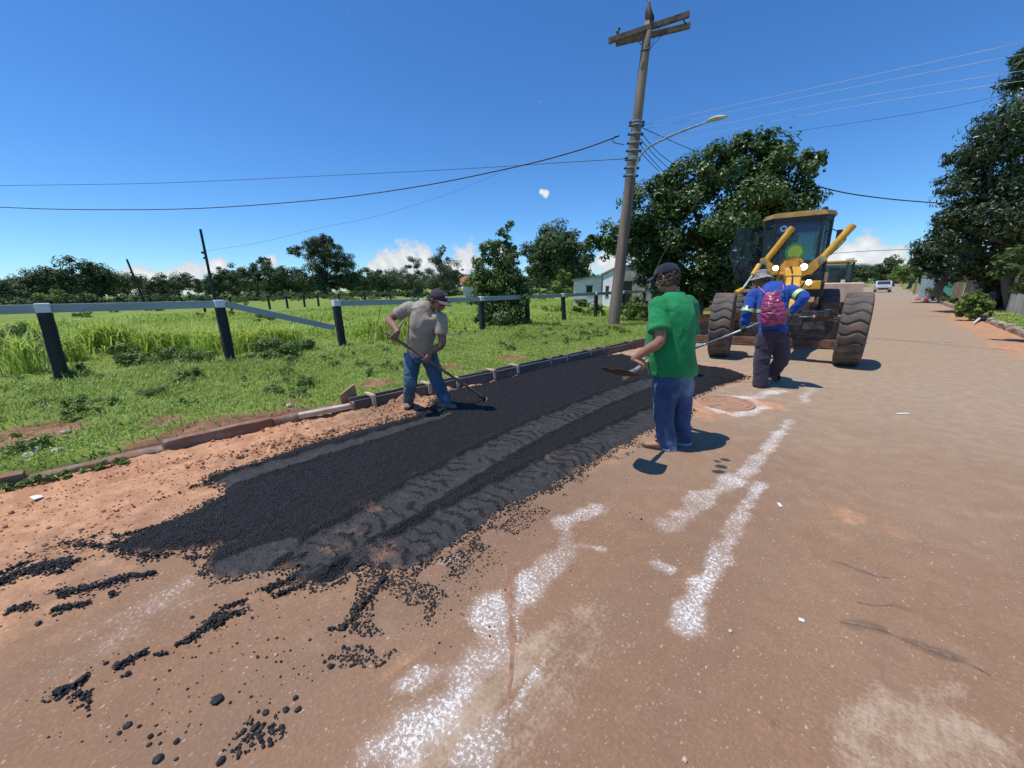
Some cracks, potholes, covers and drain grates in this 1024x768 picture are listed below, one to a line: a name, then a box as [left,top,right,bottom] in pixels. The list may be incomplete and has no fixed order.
manhole cover [697,395,756,411]
crack [835,561,889,578]
crack [505,564,516,730]
crack [841,602,990,675]
